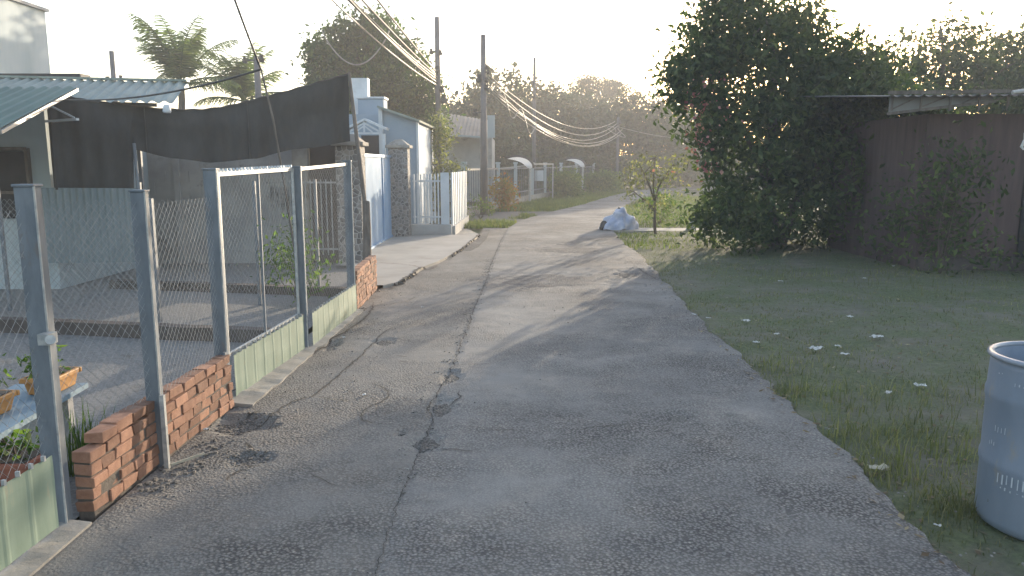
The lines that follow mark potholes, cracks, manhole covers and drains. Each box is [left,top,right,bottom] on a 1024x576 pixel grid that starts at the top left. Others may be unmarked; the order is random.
pothole [432,404,452,417]
pothole [218,418,258,436]
crack [225,231,490,480]
pothole [412,437,440,454]
pothole [238,454,266,465]
